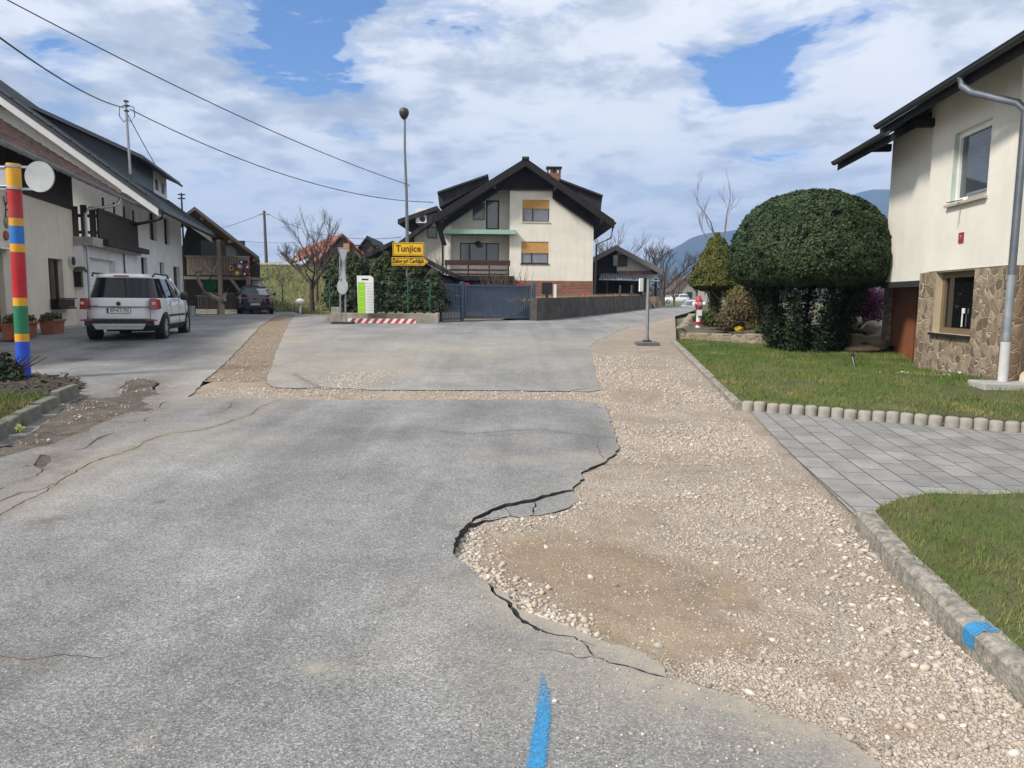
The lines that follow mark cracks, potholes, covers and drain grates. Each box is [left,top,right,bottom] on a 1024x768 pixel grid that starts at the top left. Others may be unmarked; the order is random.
crack [0,404,265,515]
crack [489,585,657,676]
crack [472,492,564,522]
pothole [35,456,51,470]
pothole [0,379,159,457]
